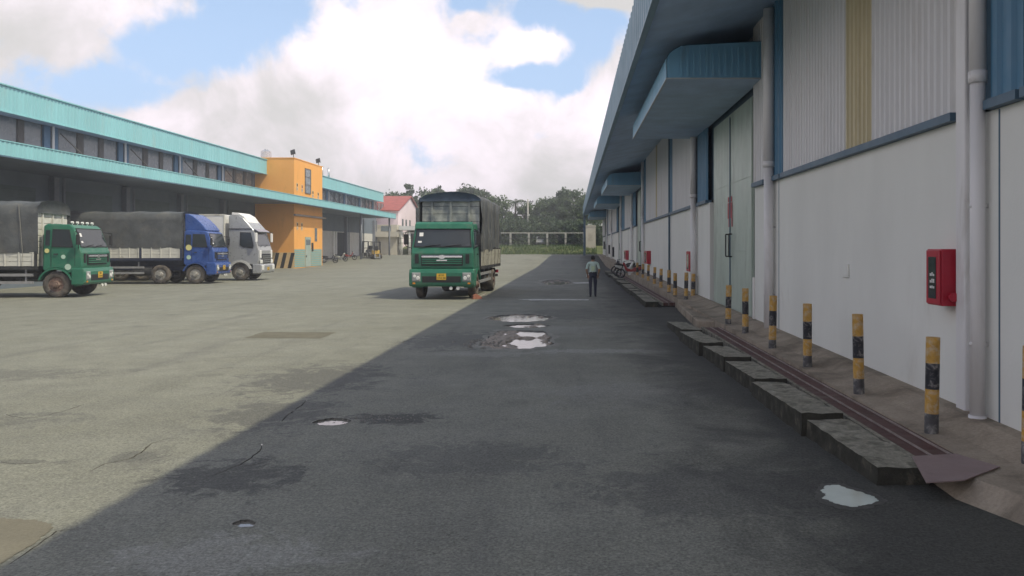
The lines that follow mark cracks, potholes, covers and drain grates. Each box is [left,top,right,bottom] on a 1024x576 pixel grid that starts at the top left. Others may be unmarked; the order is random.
pothole [468,328,560,352]
crack [212,444,269,476]
pothole [481,313,558,322]
pothole [230,519,258,528]
pothole [311,417,353,426]
crack [91,437,181,471]
